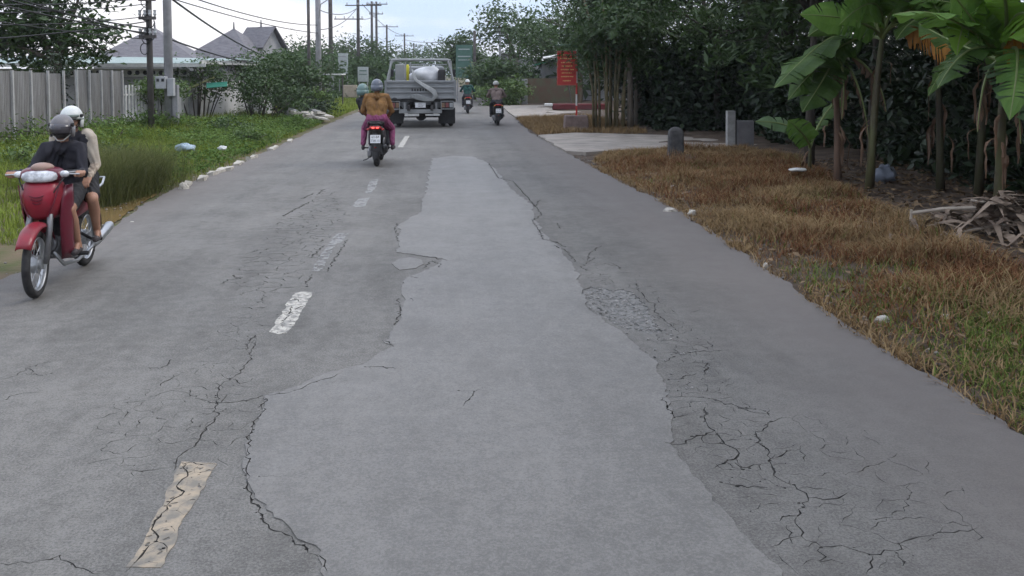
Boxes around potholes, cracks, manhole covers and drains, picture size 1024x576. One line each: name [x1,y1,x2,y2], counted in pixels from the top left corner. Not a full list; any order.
crack [89,189,348,571]
pothole [581,287,663,335]
crack [488,164,983,574]
crack [360,298,413,369]
